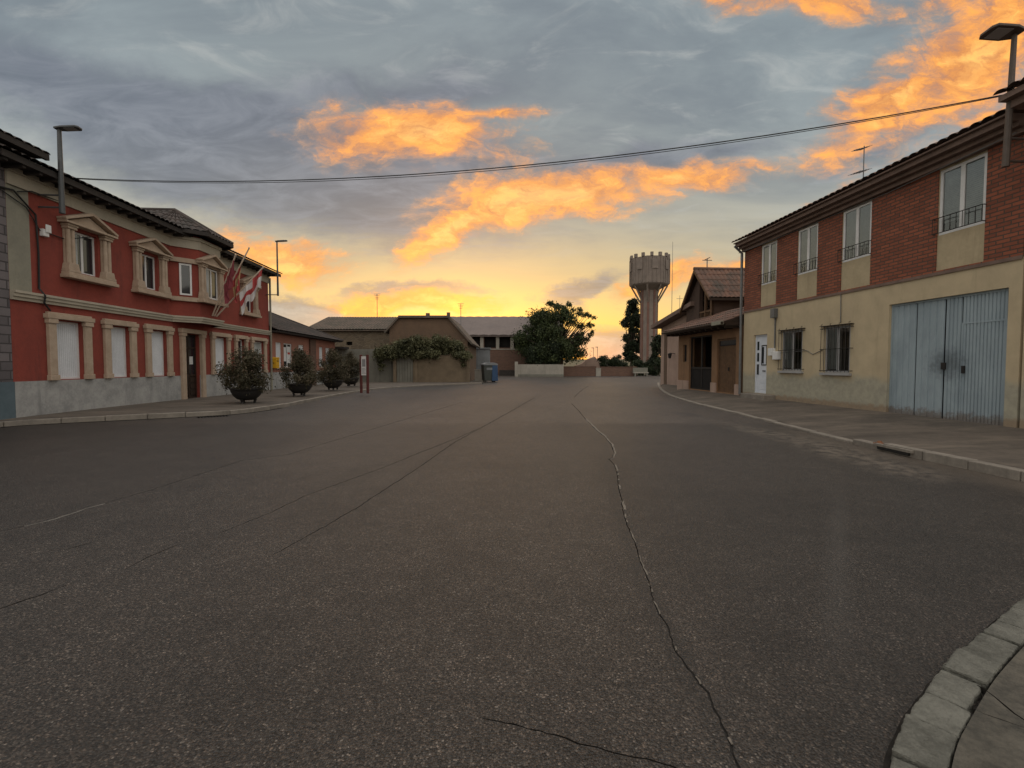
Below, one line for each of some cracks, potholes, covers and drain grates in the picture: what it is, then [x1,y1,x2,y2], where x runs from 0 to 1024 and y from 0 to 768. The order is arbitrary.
crack [223,389,741,768]
drain grate [874,443,914,456]
